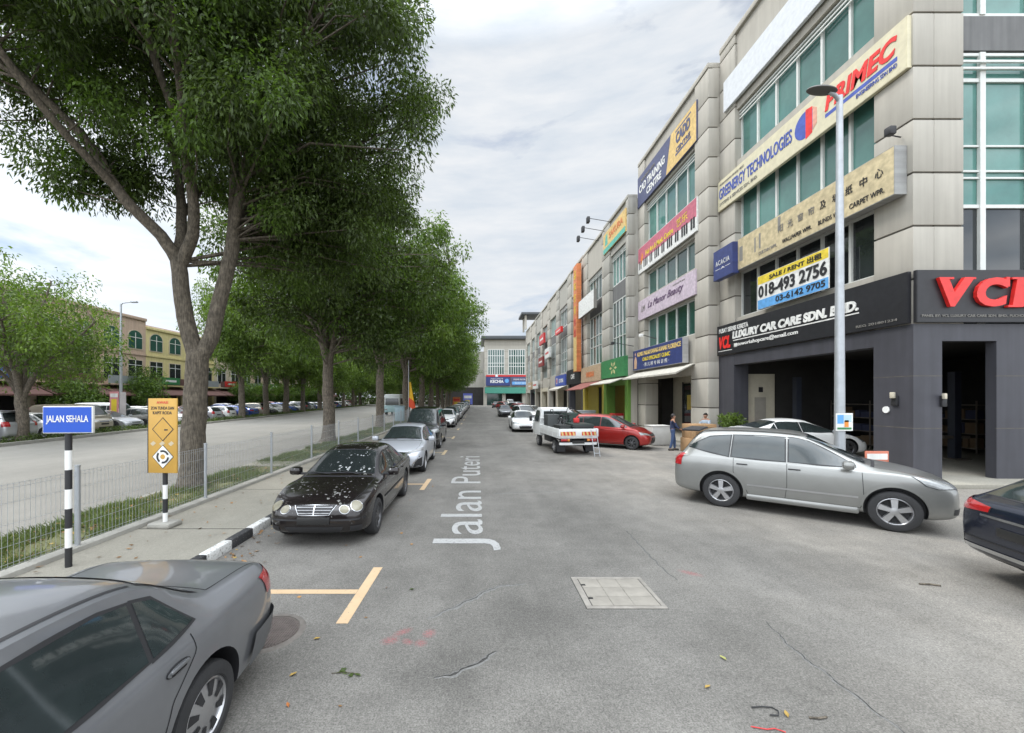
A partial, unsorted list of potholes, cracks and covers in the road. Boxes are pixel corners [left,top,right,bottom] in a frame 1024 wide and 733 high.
crack [427,584,524,619]
crack [626,530,675,578]
crack [434,651,498,679]
crack [766,621,904,733]
manhole cover [259,614,306,654]
manhole cover [570,577,668,609]
